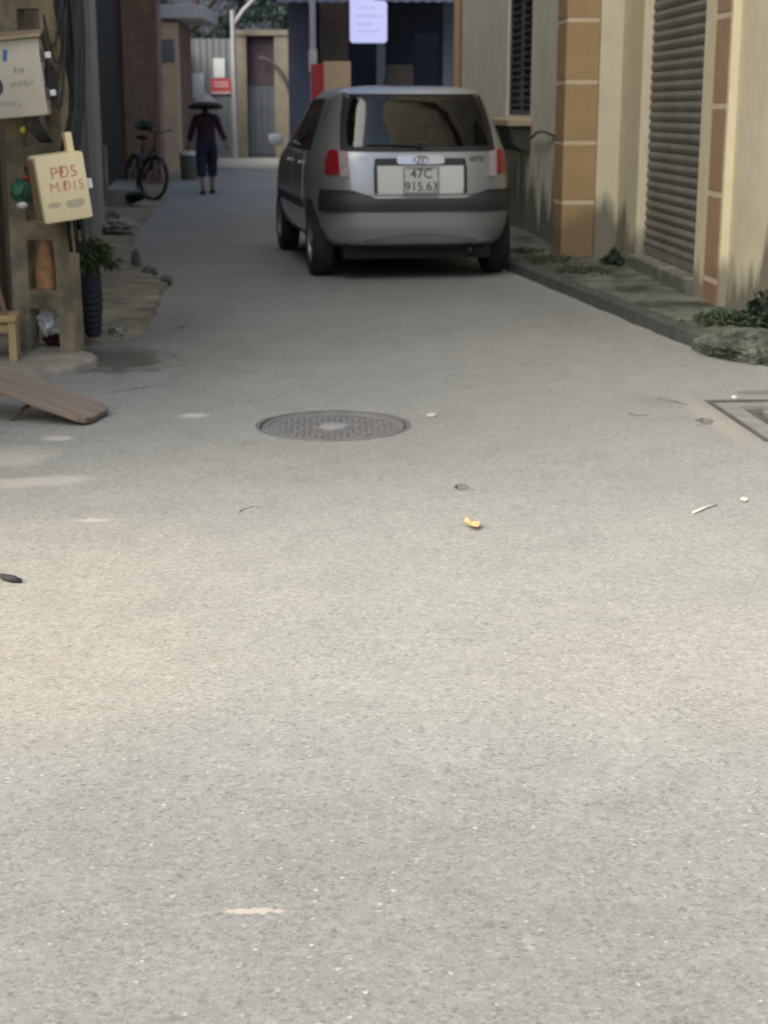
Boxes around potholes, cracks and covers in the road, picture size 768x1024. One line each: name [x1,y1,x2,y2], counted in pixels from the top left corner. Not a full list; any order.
manhole cover [255,410,411,442]
